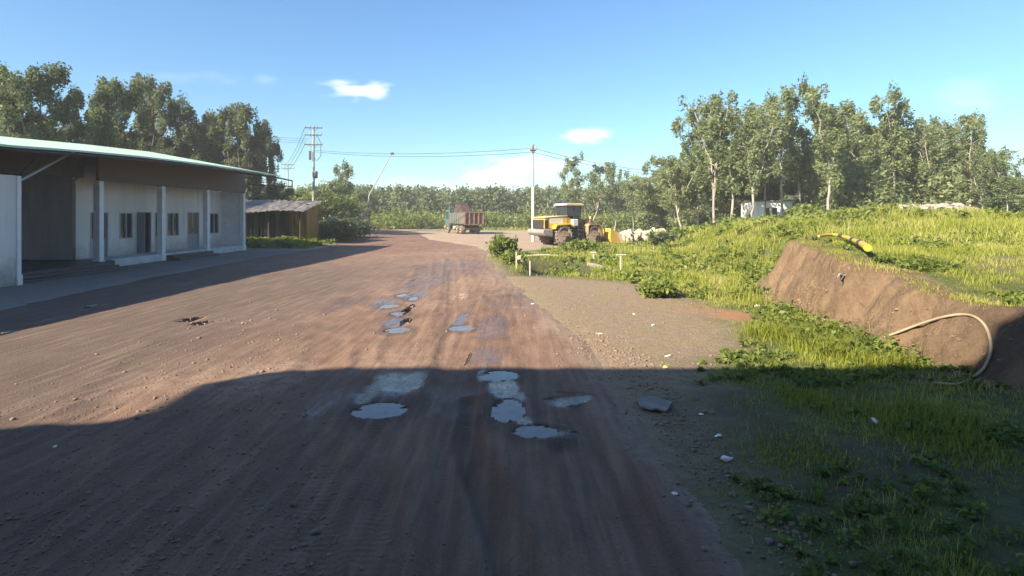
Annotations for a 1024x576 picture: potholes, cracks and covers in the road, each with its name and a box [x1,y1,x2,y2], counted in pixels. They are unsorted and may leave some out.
pothole [339,402,409,423]
pothole [473,368,526,385]
pothole [477,395,530,427]
pothole [504,423,578,439]
